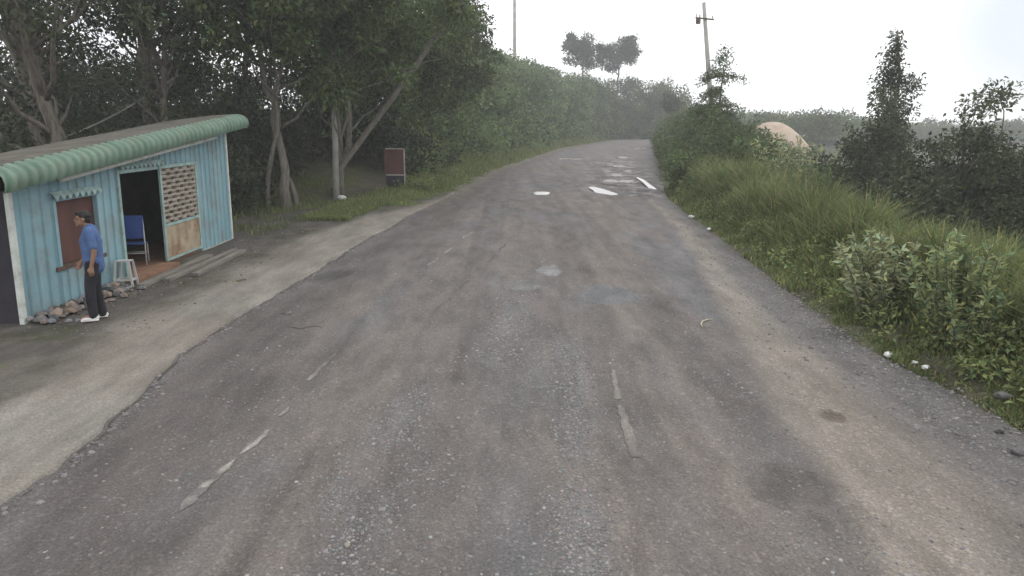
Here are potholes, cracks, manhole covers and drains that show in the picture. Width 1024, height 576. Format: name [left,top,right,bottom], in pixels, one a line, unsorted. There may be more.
pothole [815,408,850,425]
crack [435,237,512,311]
